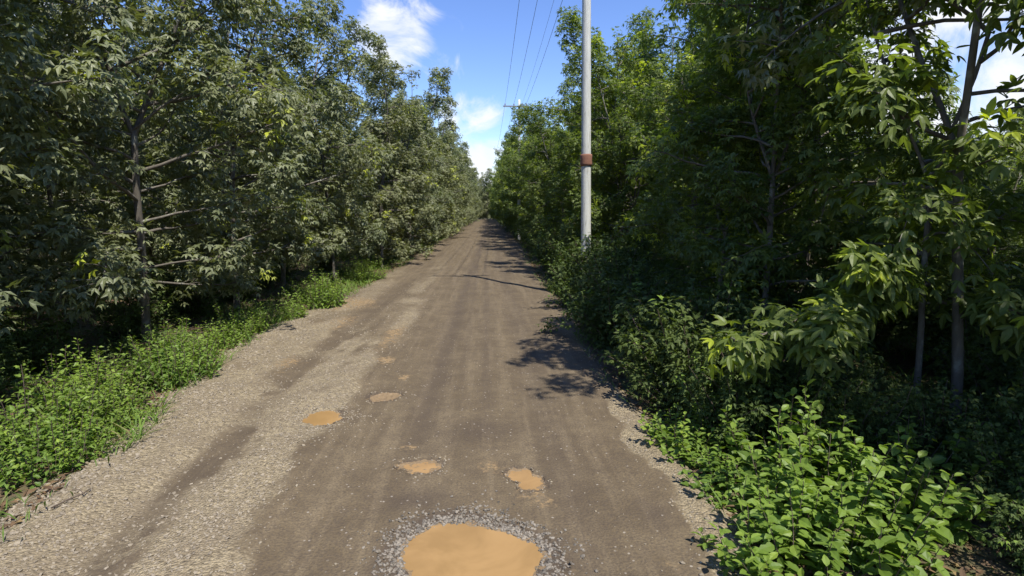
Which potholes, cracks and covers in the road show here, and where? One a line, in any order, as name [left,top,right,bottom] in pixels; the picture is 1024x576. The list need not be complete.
pothole [392,454,447,479]
pothole [354,490,599,576]
pothole [501,459,552,494]
pothole [269,398,395,443]
